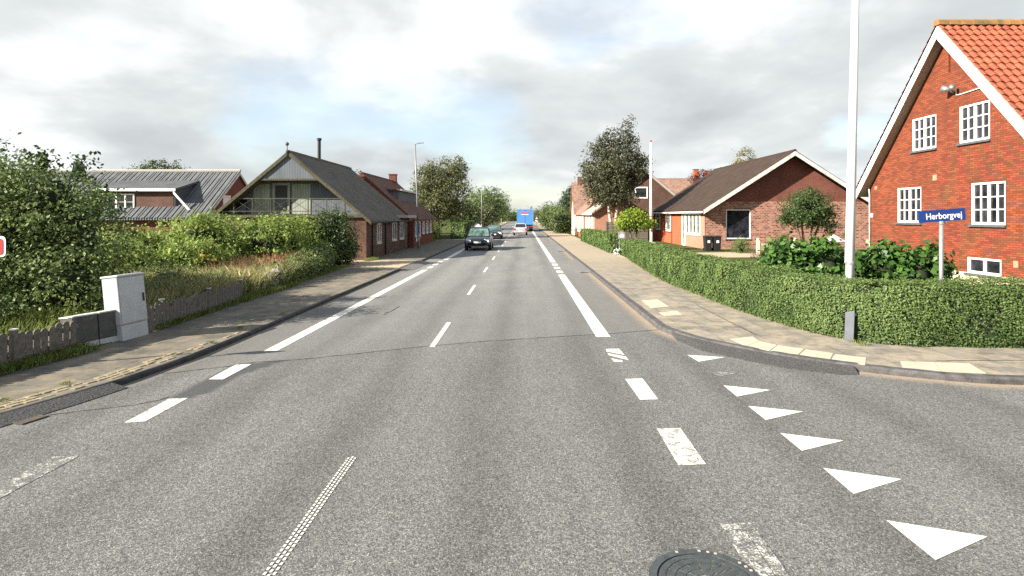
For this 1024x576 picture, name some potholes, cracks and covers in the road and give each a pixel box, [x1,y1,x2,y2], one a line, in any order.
drain grate [11,414,49,425]
manhole cover [649,549,759,576]
